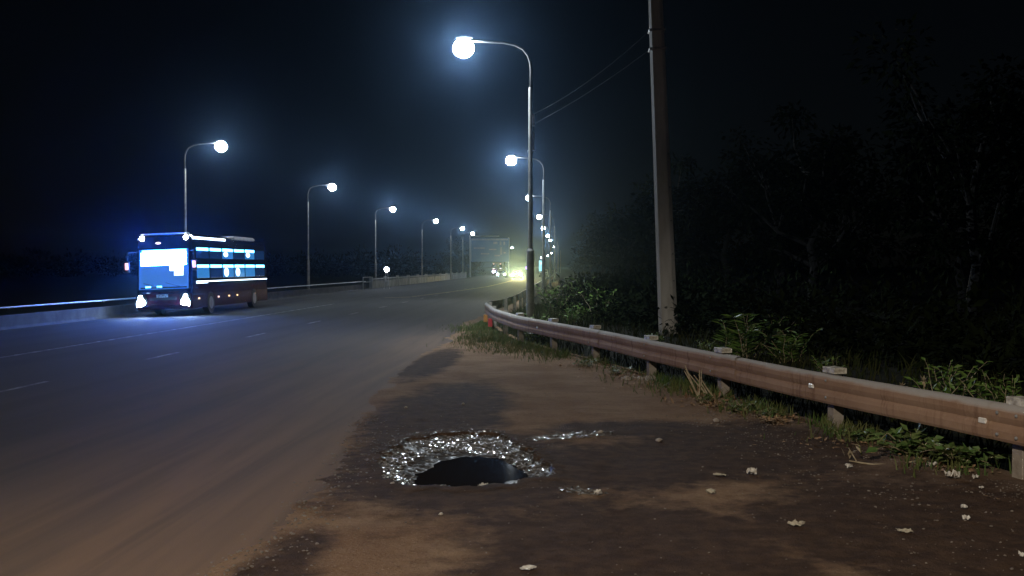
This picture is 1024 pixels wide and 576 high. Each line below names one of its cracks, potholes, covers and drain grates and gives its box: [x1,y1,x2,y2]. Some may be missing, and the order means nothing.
pothole [346,426,572,494]
